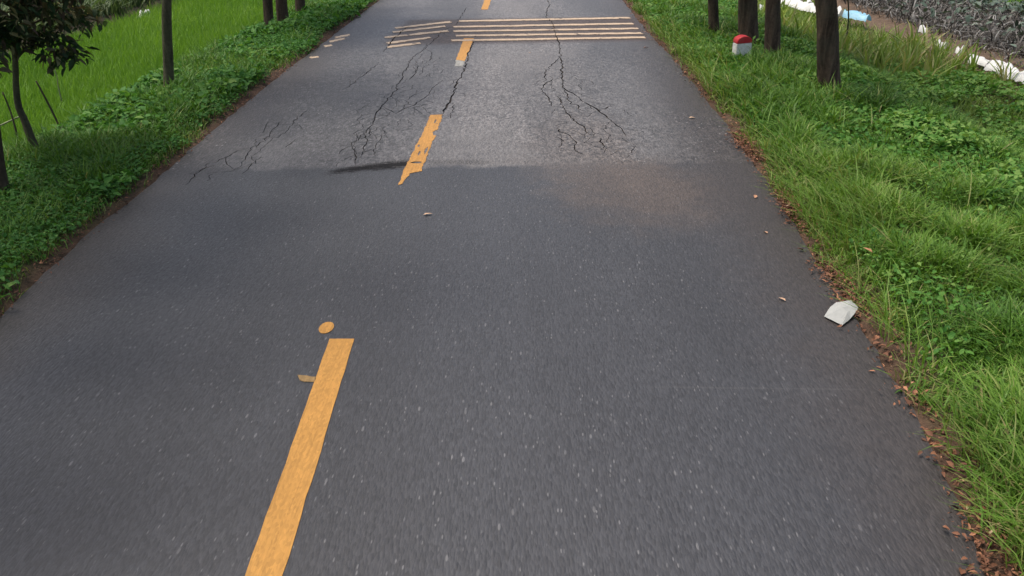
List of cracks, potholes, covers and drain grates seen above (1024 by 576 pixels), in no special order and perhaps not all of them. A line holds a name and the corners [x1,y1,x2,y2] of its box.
crack [534,1,635,153]
crack [443,42,474,118]
crack [189,111,306,182]
crack [325,8,466,164]
